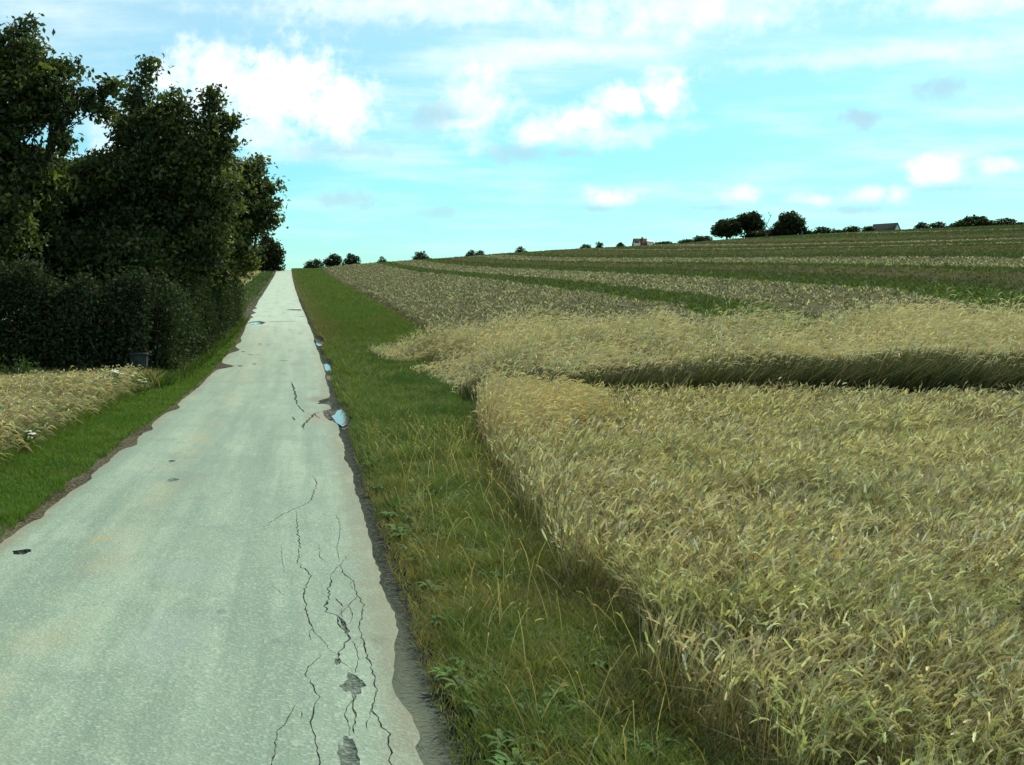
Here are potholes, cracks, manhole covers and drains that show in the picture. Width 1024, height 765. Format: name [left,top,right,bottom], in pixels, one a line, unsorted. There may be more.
crack [266,477,393,765]
pothole [337,735,360,765]
crack [291,382,322,430]
pothole [323,408,353,430]
pothole [339,672,367,700]
